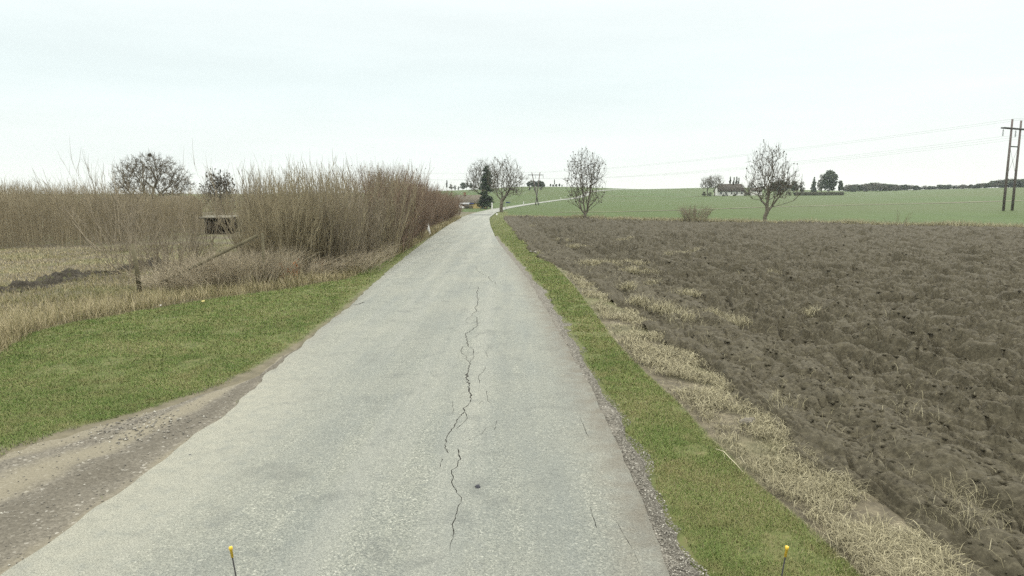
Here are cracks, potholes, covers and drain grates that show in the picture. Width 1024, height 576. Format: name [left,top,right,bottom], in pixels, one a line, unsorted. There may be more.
crack [440,271,500,545]
